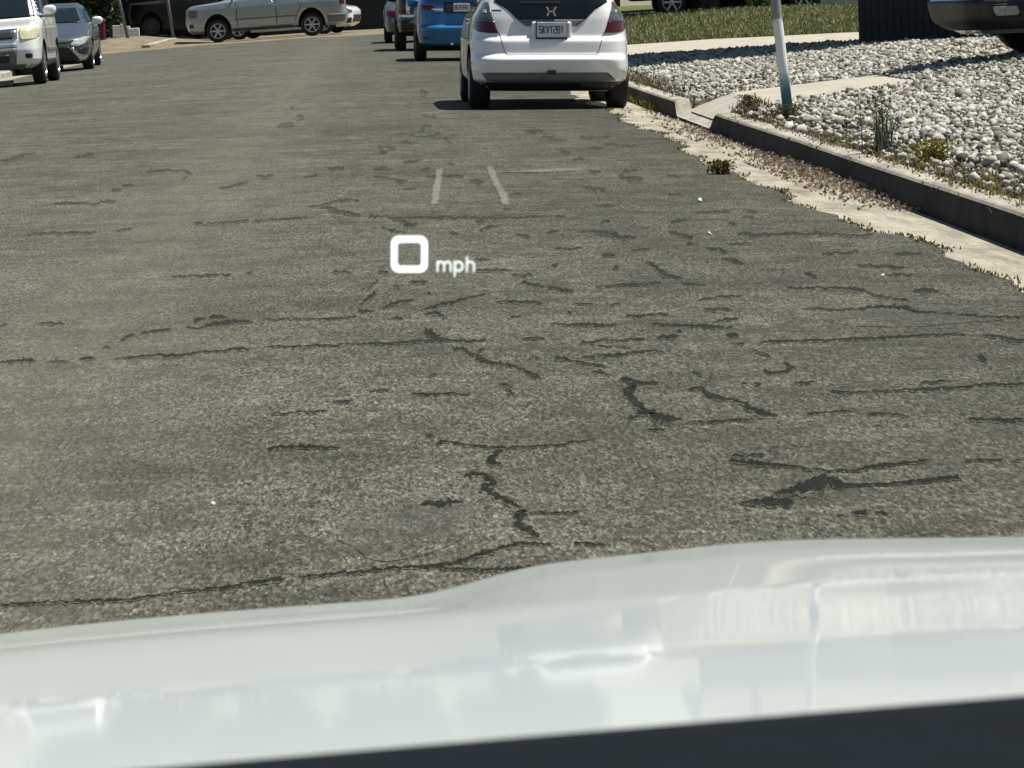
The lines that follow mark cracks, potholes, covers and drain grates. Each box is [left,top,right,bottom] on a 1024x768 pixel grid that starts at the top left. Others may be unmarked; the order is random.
crack [0,88,1024,424]
crack [0,433,596,607]
crack [729,452,928,473]
